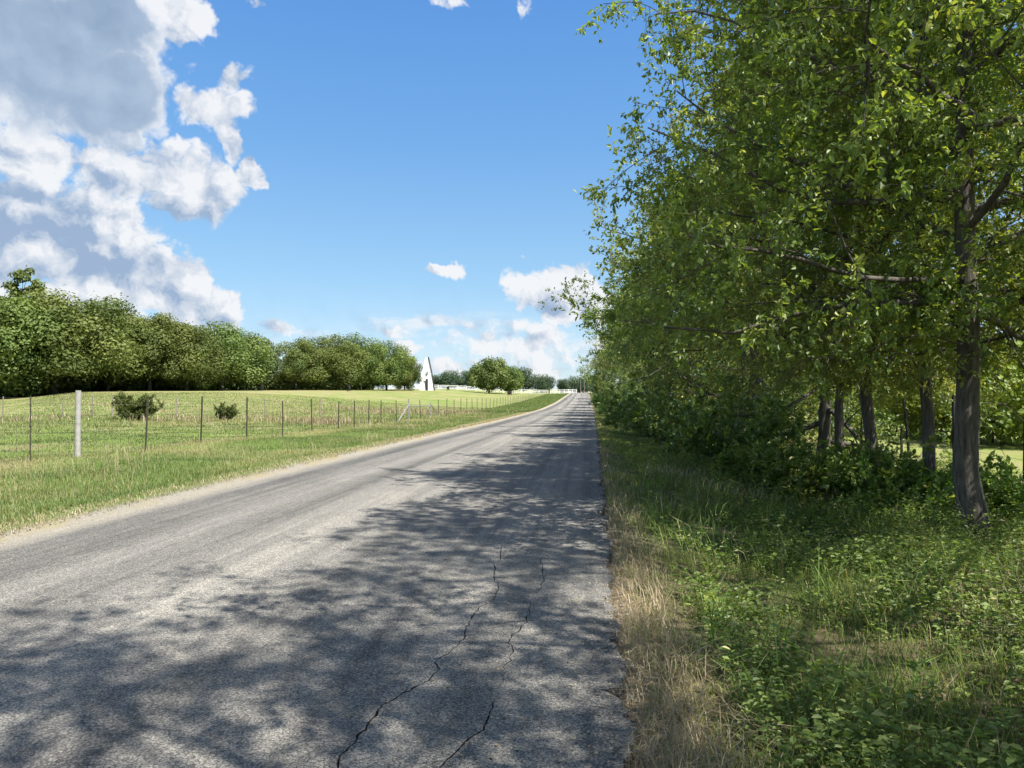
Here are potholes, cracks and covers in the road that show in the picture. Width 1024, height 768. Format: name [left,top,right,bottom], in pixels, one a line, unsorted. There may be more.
crack [440,559,545,768]
crack [337,538,504,768]
